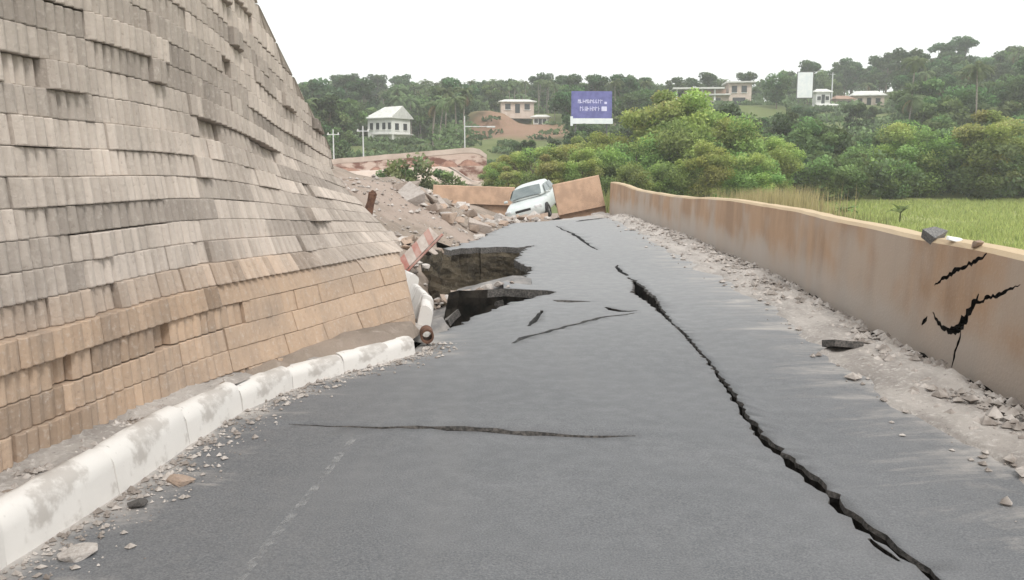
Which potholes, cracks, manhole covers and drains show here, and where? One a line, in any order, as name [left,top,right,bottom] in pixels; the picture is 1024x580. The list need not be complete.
crack [558,218,601,250]
pothole [420,246,531,308]
crack [513,250,1024,580]
crack [324,426,619,438]
